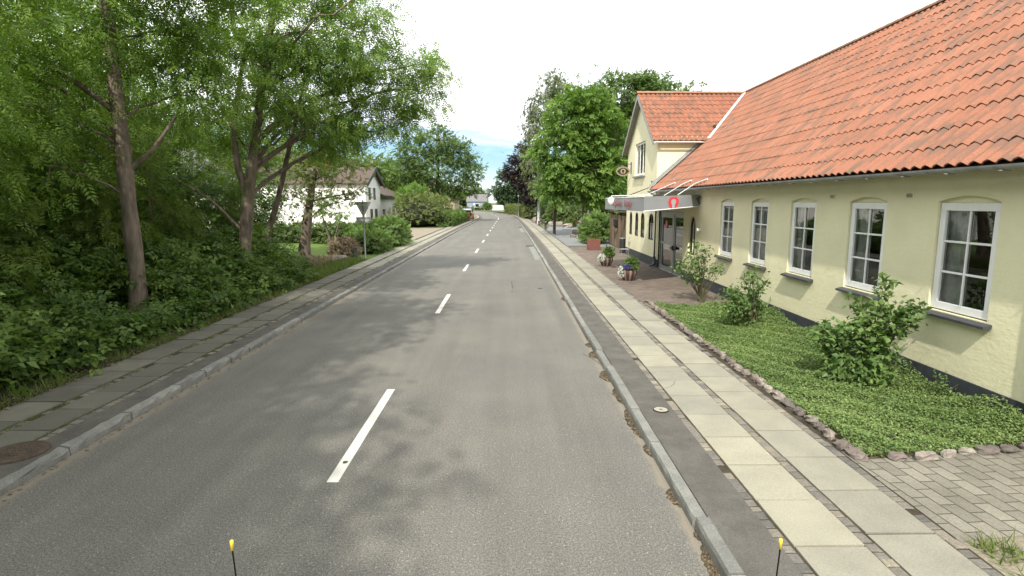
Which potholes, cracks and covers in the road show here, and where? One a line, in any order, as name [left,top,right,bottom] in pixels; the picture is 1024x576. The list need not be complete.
manhole cover [0,440,52,465]
